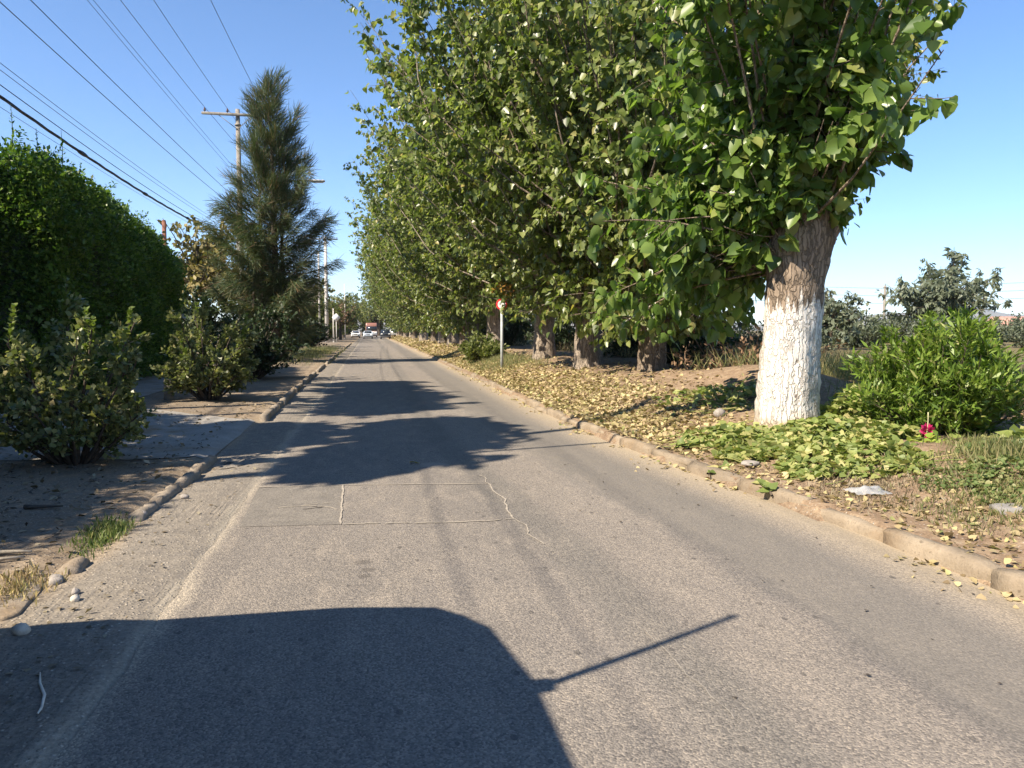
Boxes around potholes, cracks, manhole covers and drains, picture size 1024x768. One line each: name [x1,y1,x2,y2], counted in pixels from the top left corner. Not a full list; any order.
crack [266,475,544,544]
